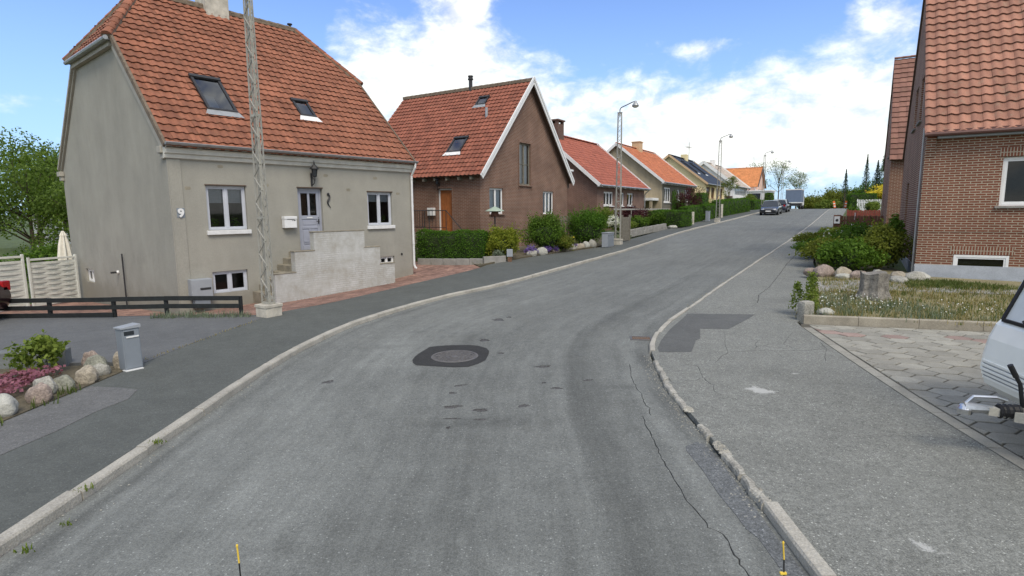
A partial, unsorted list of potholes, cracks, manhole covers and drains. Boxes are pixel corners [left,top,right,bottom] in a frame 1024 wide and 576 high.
crack [669,332,827,395]
crack [629,364,750,576]
manhole cover [413,345,489,367]
